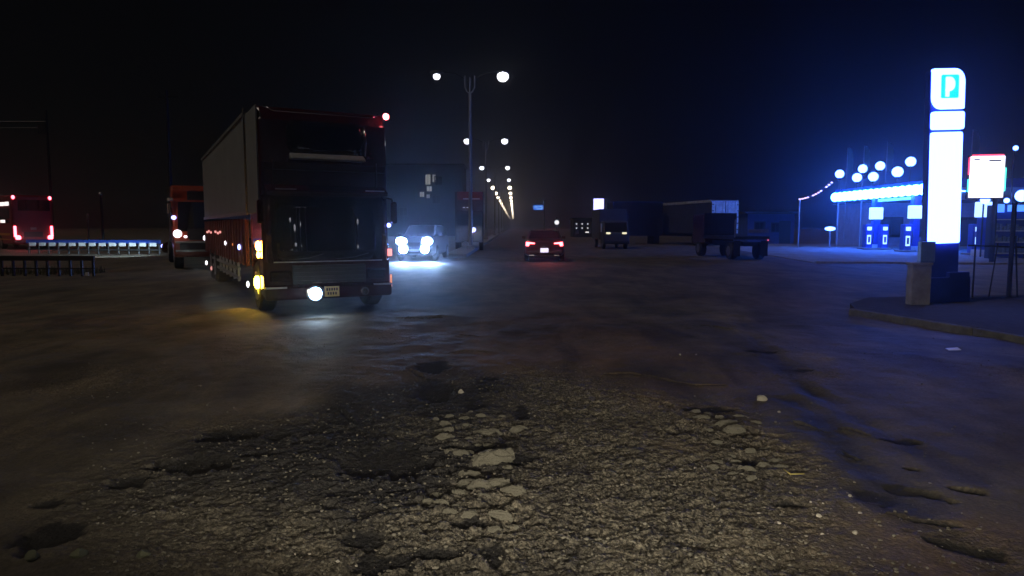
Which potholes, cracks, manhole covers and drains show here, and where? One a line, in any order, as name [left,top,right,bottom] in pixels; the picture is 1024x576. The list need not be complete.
pothole [106,473,162,491]
pothole [4,520,91,559]
pothole [132,451,241,477]
pothole [901,530,1011,563]
pothole [407,378,459,409]
pothole [880,483,960,505]
pothole [412,359,458,374]
pothole [947,486,991,496]
crack [603,373,728,407]
